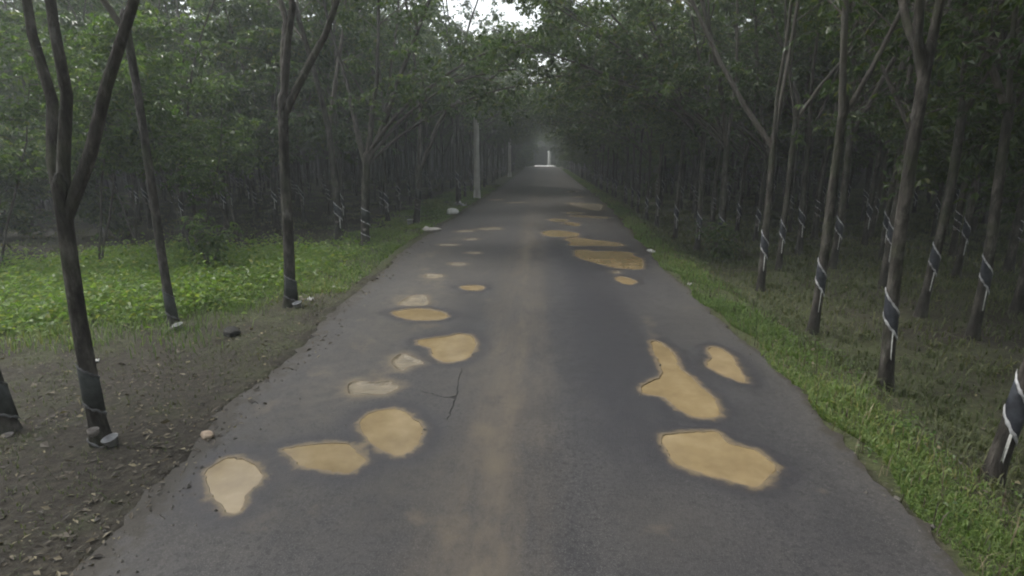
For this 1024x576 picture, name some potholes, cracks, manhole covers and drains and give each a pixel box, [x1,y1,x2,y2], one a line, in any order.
crack [421,368,462,420]
